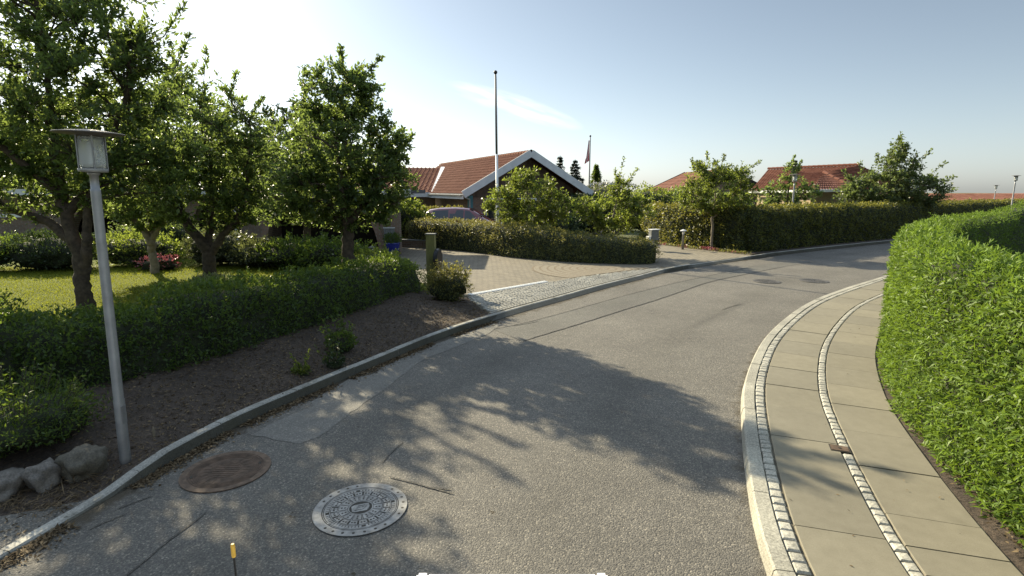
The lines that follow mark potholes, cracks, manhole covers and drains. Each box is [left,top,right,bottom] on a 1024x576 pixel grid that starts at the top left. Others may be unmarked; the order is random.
manhole cover [312,483,407,537]
crack [382,442,453,494]
crack [89,495,207,576]
manhole cover [178,450,271,493]
